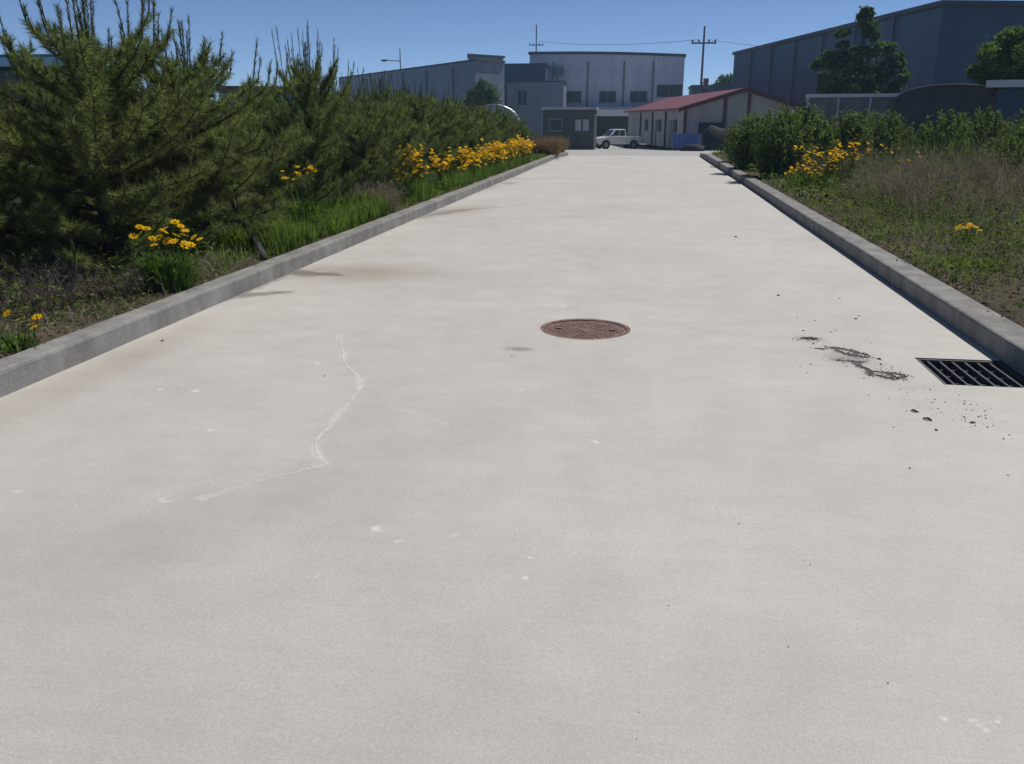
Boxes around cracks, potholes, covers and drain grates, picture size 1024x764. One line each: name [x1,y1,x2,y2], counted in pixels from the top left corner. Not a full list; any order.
drain grate [915,358,1024,420]
crack [202,335,365,498]
manhole cover [541,319,630,340]
